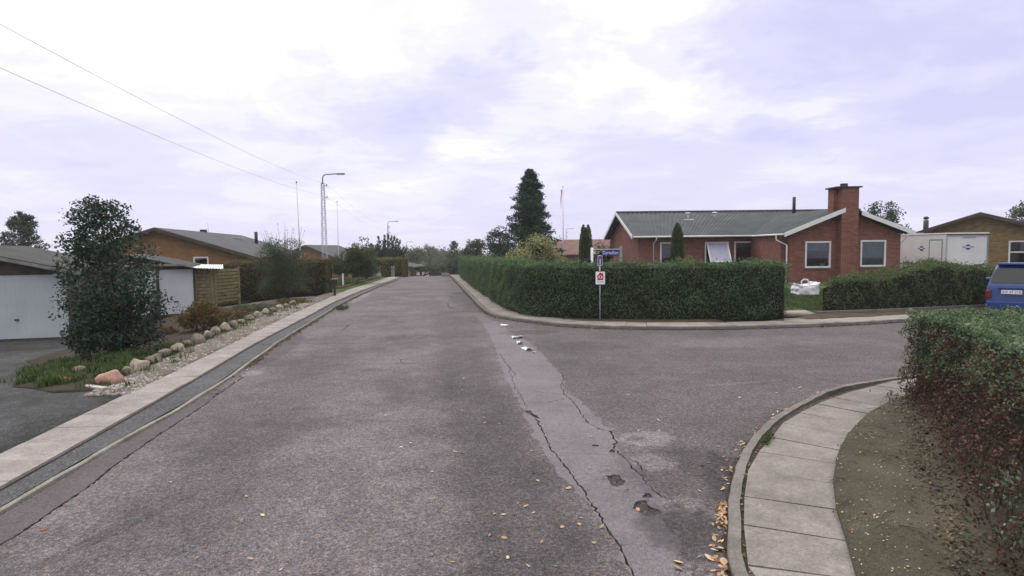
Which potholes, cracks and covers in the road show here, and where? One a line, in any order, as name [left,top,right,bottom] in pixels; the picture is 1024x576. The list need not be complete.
crack [501,355,663,576]
pothole [606,474,625,487]
pothole [632,500,662,517]
